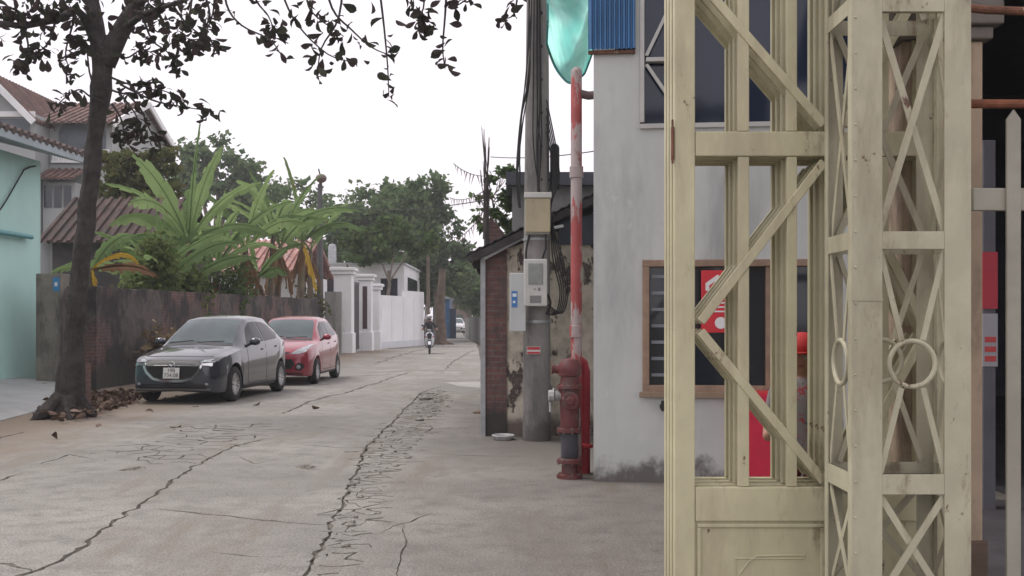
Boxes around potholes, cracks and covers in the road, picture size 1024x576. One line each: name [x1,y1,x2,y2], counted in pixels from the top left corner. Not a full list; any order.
crack [384,514,429,576]
crack [104,424,280,464]
